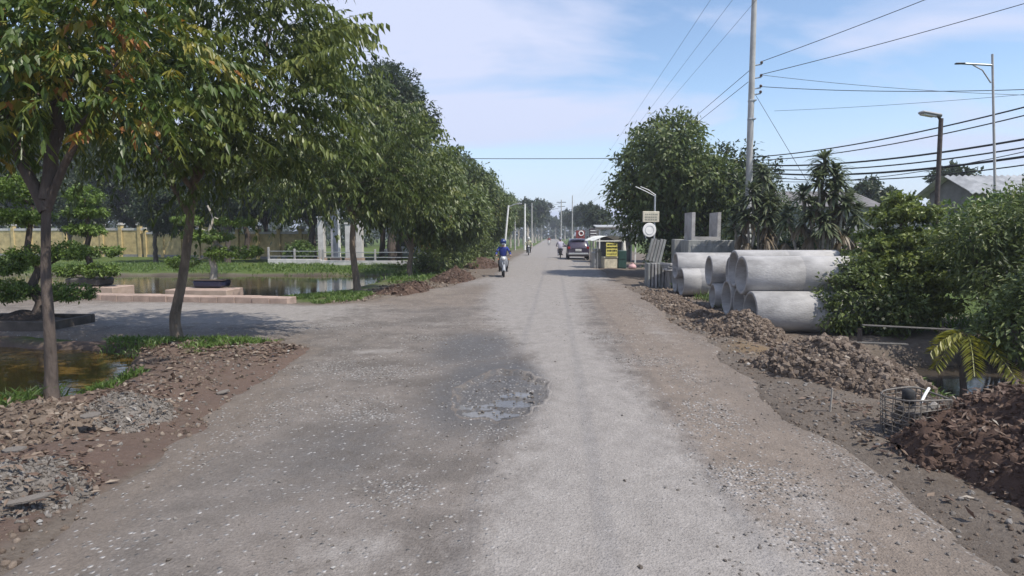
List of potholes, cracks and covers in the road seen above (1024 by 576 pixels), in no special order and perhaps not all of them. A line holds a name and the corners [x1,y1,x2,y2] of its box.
pothole [450,368,552,424]
